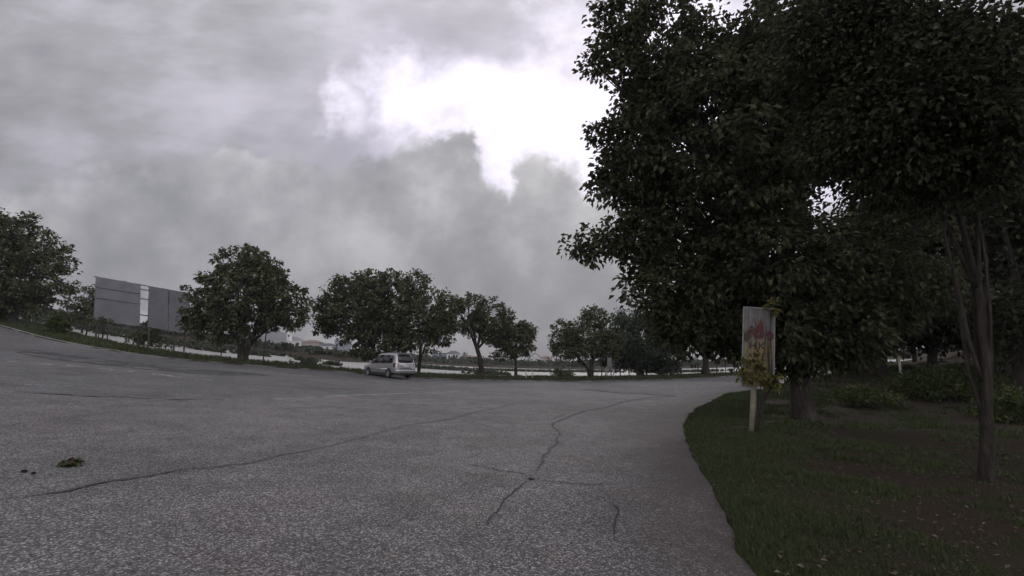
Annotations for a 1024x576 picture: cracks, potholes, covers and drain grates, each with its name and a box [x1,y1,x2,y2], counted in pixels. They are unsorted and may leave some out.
crack [1,401,522,499]
crack [611,503,620,539]
crack [461,396,673,527]
